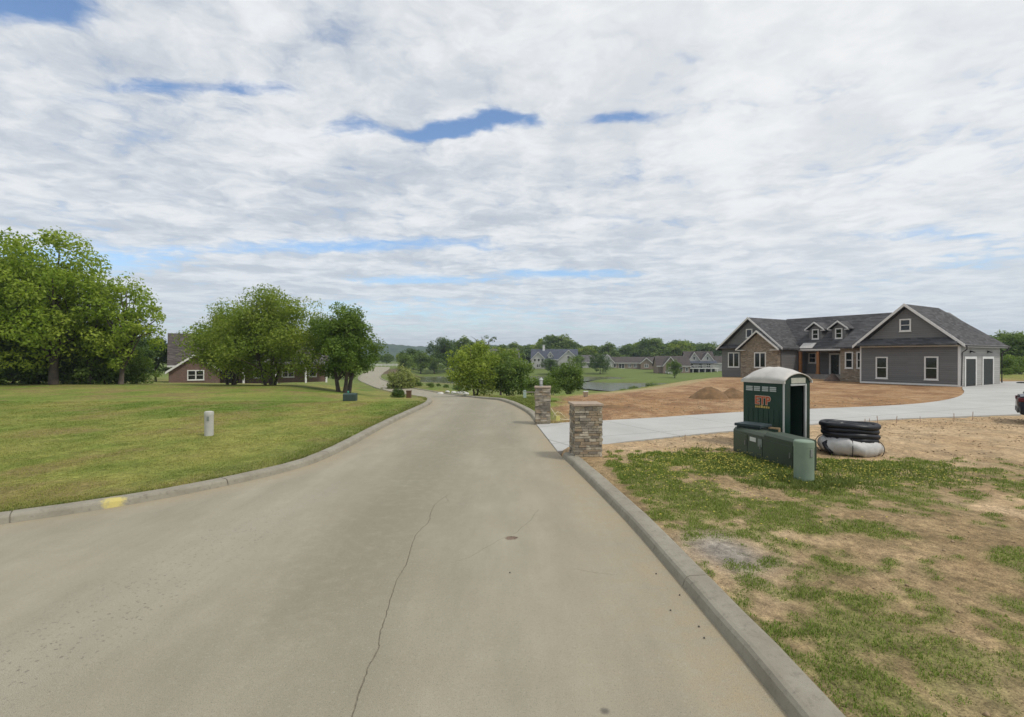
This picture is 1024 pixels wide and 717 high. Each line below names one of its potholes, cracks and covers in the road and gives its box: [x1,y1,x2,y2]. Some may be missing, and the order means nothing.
crack [351,496,448,717]
